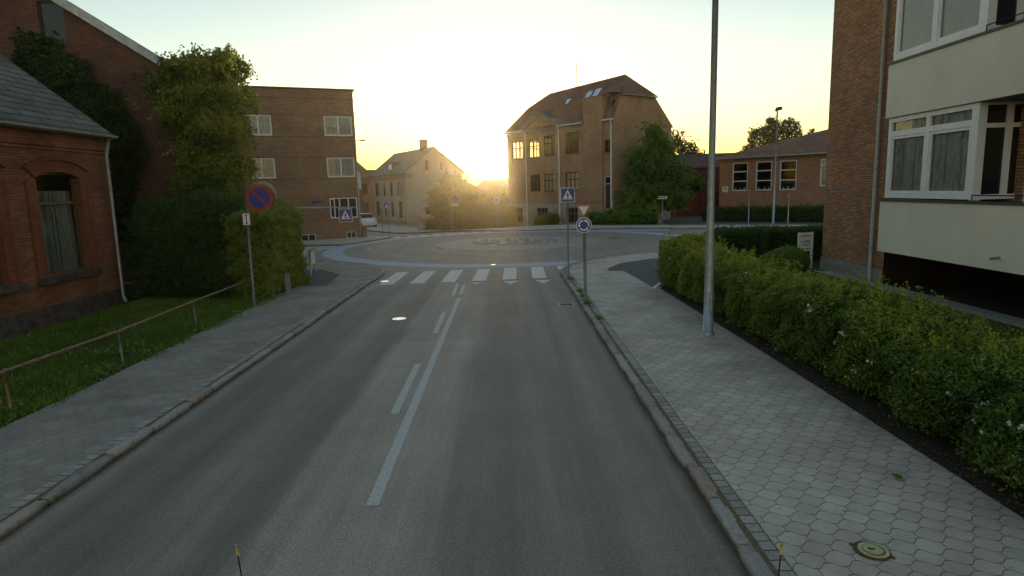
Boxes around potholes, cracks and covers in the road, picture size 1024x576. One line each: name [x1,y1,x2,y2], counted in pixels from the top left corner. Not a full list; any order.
manhole cover [849,541,895,561]
